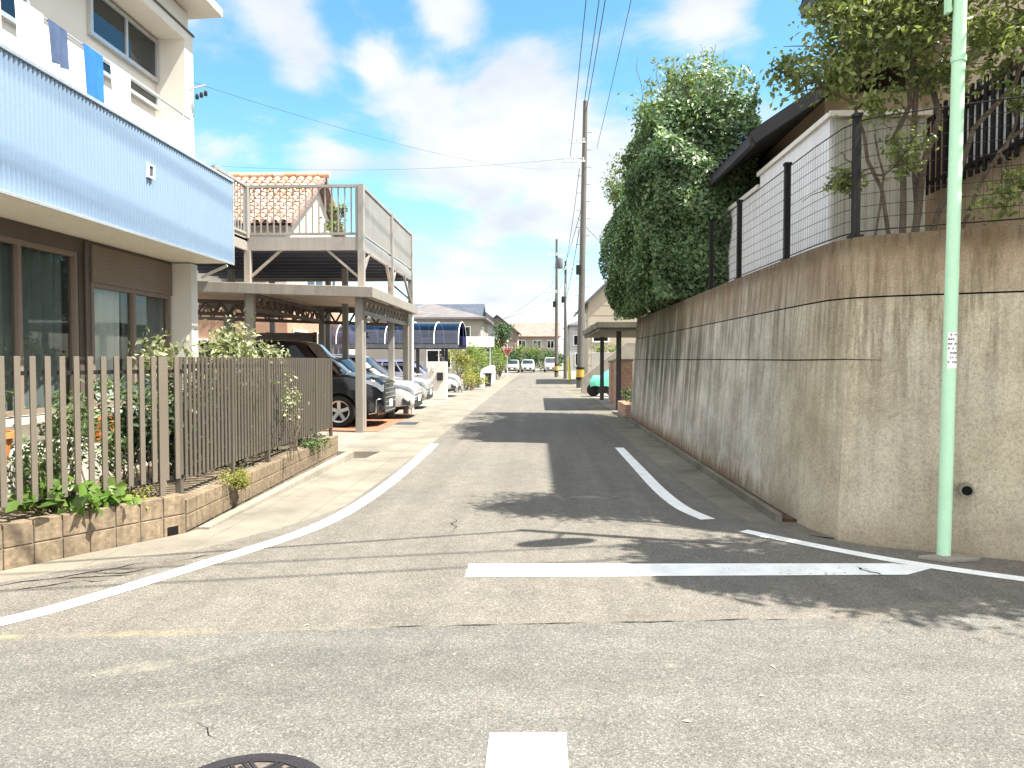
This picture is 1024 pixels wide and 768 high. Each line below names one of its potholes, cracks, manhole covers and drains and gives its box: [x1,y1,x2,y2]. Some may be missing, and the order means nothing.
manhole cover [198,753,320,768]
